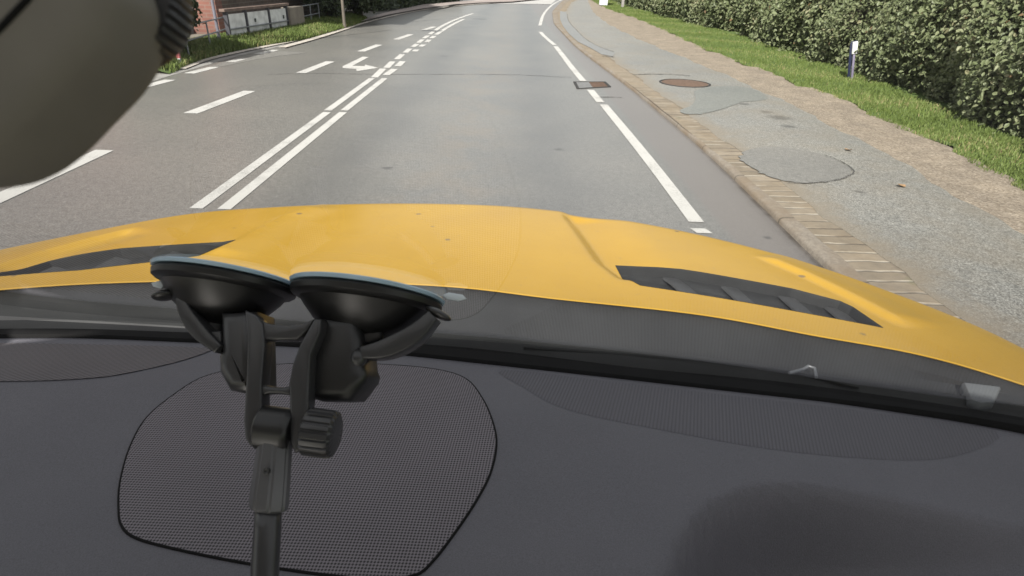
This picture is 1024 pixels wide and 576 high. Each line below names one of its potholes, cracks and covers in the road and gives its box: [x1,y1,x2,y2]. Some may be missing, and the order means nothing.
manhole cover [659,79,711,88]
drain grate [573,81,611,89]
